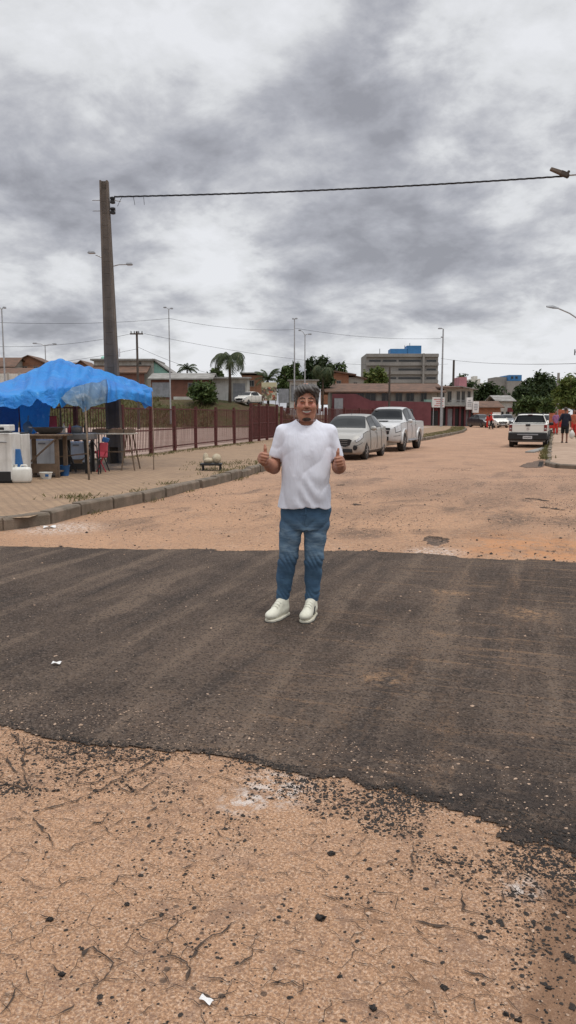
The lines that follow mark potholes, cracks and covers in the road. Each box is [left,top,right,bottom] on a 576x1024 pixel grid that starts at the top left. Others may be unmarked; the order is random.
pothole [418,534,454,548]
crack [0,726,576,1024]
